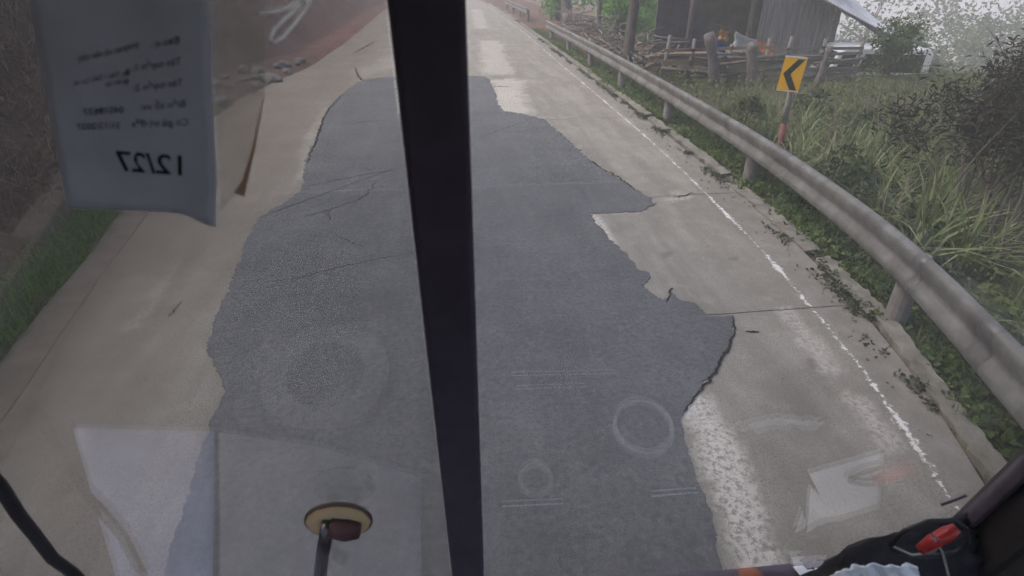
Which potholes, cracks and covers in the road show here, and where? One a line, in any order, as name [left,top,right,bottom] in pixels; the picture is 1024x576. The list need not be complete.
crack [304,169,396,223]
